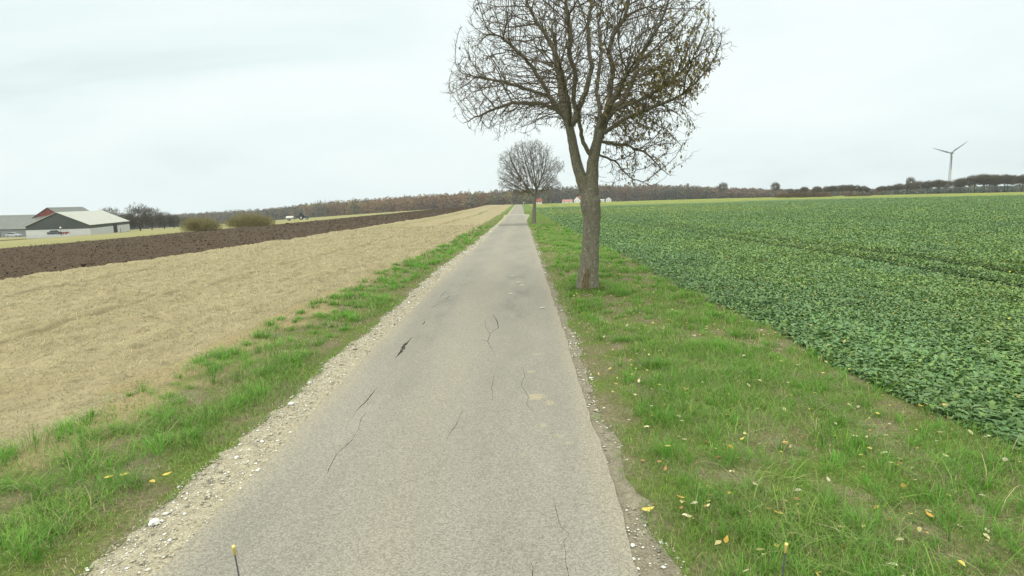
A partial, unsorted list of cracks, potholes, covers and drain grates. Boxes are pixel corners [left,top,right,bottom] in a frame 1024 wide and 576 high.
crack [395,292,448,358]
crack [328,389,376,471]
